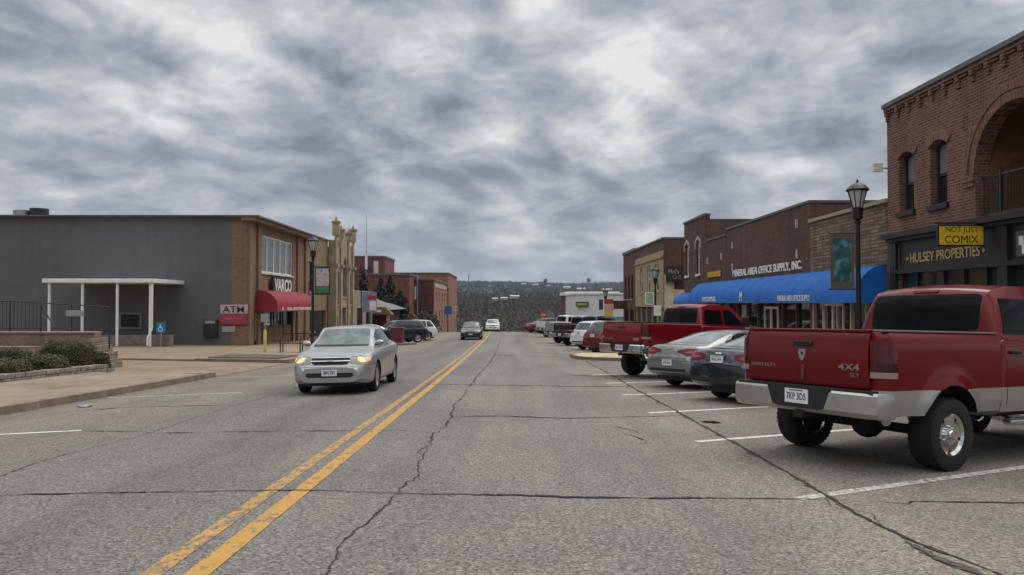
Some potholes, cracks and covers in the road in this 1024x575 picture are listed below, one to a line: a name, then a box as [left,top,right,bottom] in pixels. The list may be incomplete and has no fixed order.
crack [1,336,1024,575]
